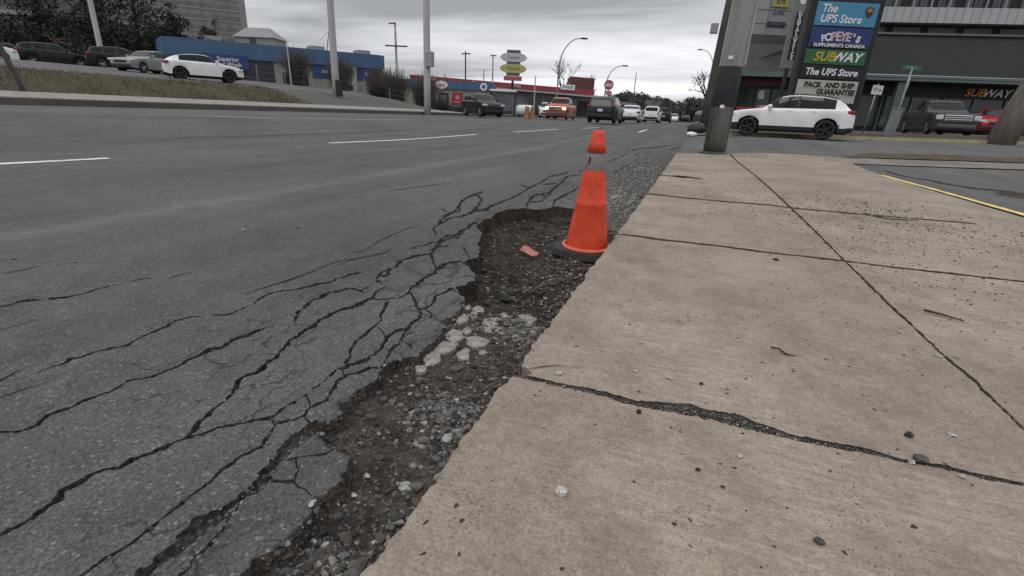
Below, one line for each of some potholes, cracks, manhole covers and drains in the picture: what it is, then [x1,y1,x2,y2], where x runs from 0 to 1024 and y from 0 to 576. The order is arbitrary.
pothole [455,207,615,328]
crack [0,145,673,576]
